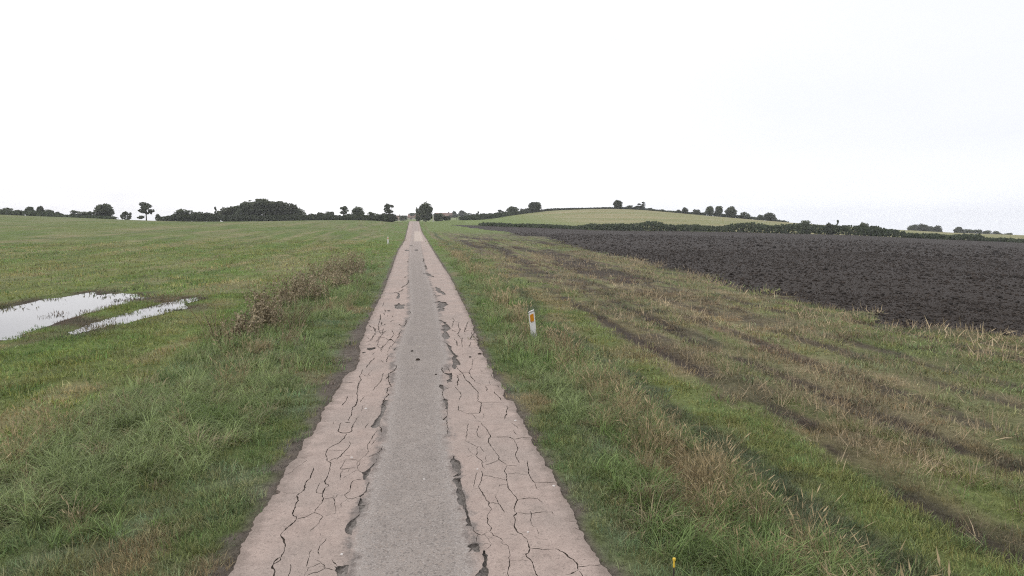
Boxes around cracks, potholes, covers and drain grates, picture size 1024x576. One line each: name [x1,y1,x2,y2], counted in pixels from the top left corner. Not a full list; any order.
pothole [345,514,360,535]
crack [271,259,427,576]
pothole [450,456,461,477]
pothole [475,550,489,576]
pothole [452,478,466,508]
crack [441,319,598,576]
